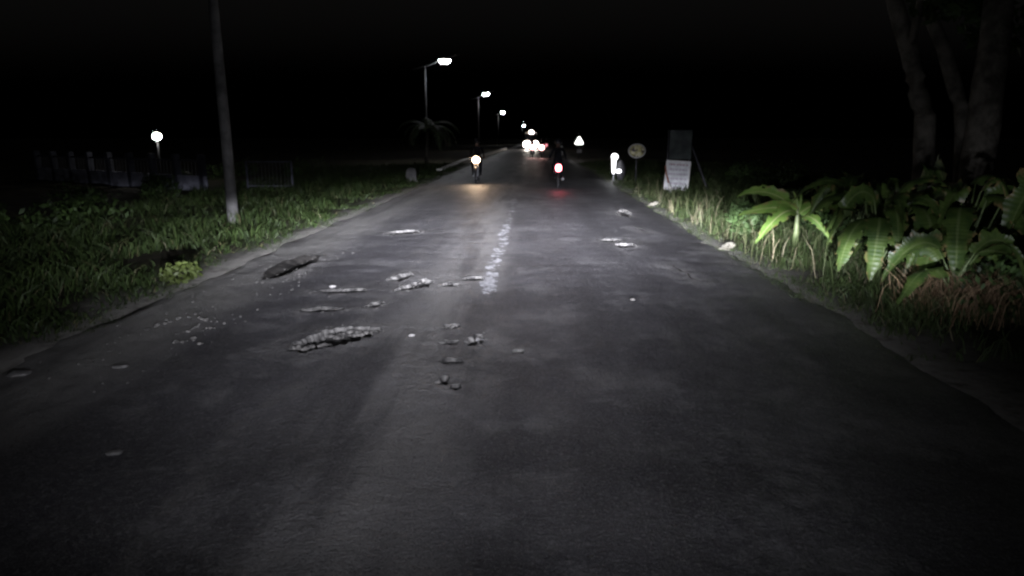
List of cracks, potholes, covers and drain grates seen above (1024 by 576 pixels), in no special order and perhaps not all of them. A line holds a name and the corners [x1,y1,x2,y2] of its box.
pothole [393,278,434,291]
pothole [435,357,464,365]
pothole [285,326,384,353]
pothole [260,255,321,280]
pothole [434,374,451,385]
pothole [386,272,415,281]
pothole [465,334,486,346]
